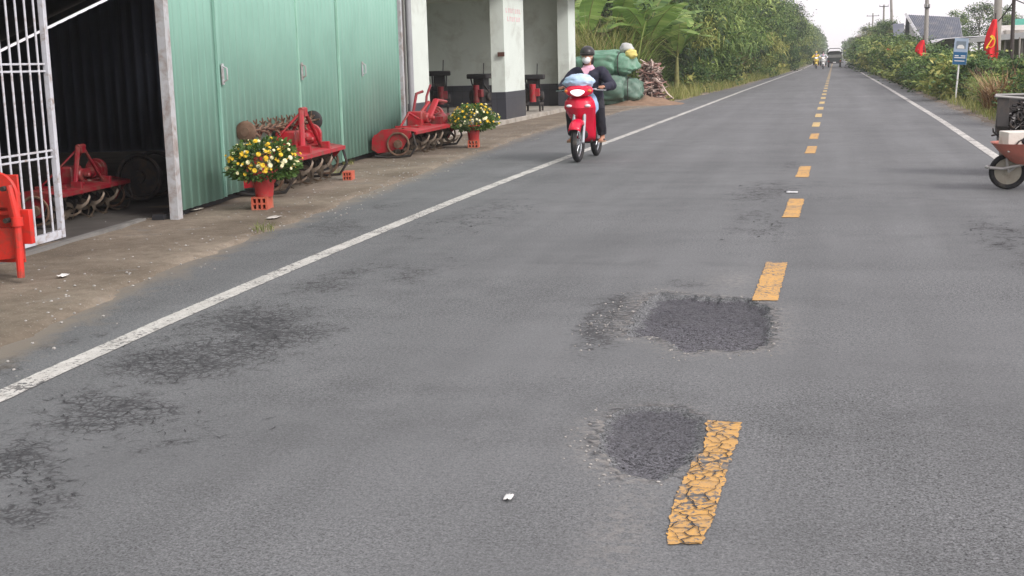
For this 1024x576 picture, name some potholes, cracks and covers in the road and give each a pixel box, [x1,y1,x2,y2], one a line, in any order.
crack [962,222,1024,255]
crack [98,298,392,389]
crack [722,183,805,242]
crack [0,374,276,545]
